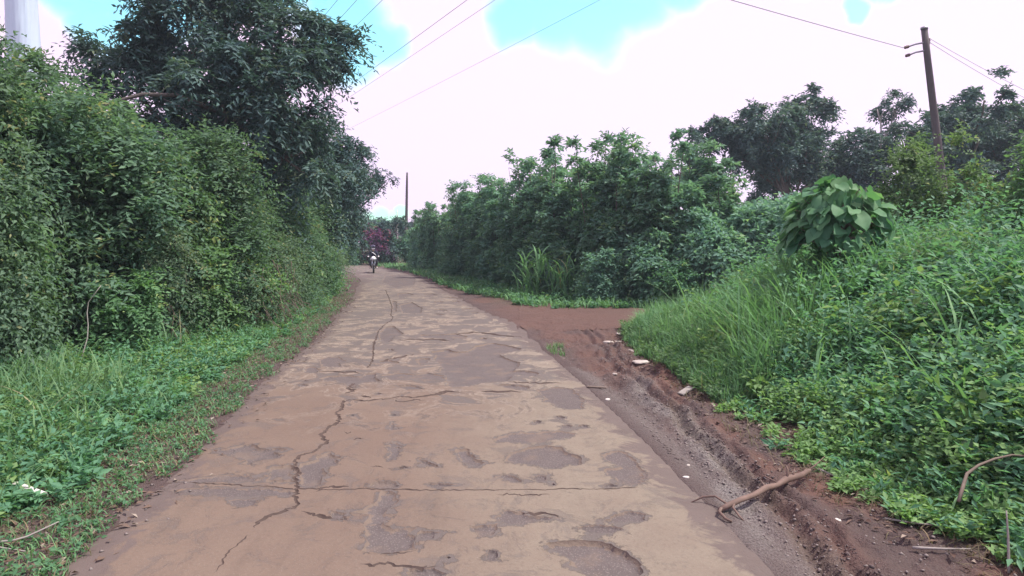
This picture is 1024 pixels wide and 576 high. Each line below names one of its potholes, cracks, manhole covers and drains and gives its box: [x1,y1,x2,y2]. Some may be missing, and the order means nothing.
pothole [602,451,645,486]
crack [214,292,519,573]
pothole [577,524,622,533]
pothole [495,510,559,525]
pothole [455,448,485,468]
pothole [546,540,644,576]
pothole [504,445,582,469]
pothole [354,491,416,553]
pothole [604,511,646,523]
pothole [535,387,585,409]
pothole [470,523,498,537]
